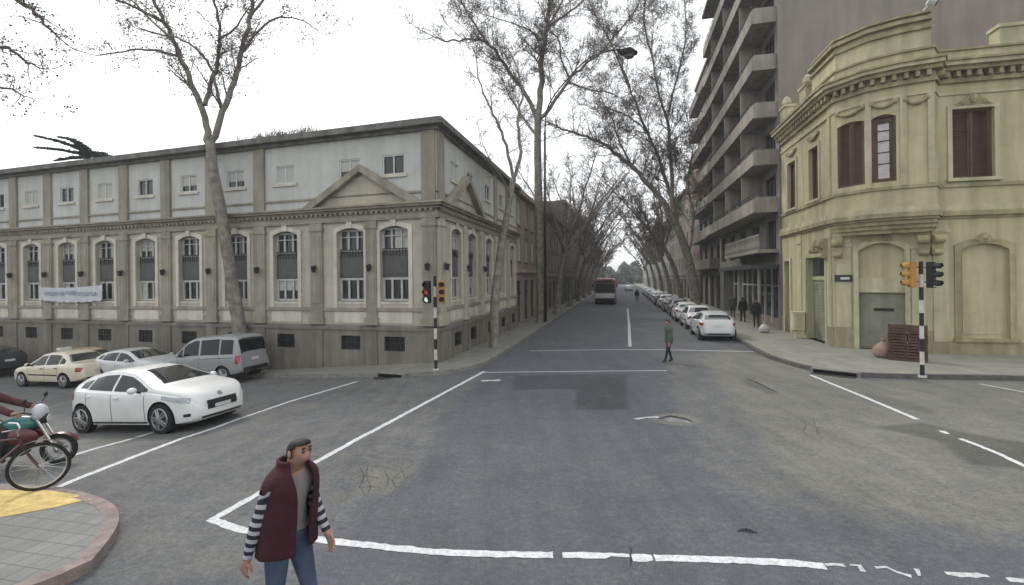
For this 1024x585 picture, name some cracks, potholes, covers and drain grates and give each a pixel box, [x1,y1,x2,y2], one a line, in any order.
crack [359,466,415,494]
drain grate [810,366,862,379]
drain grate [373,371,408,379]
pothole [658,413,694,423]
